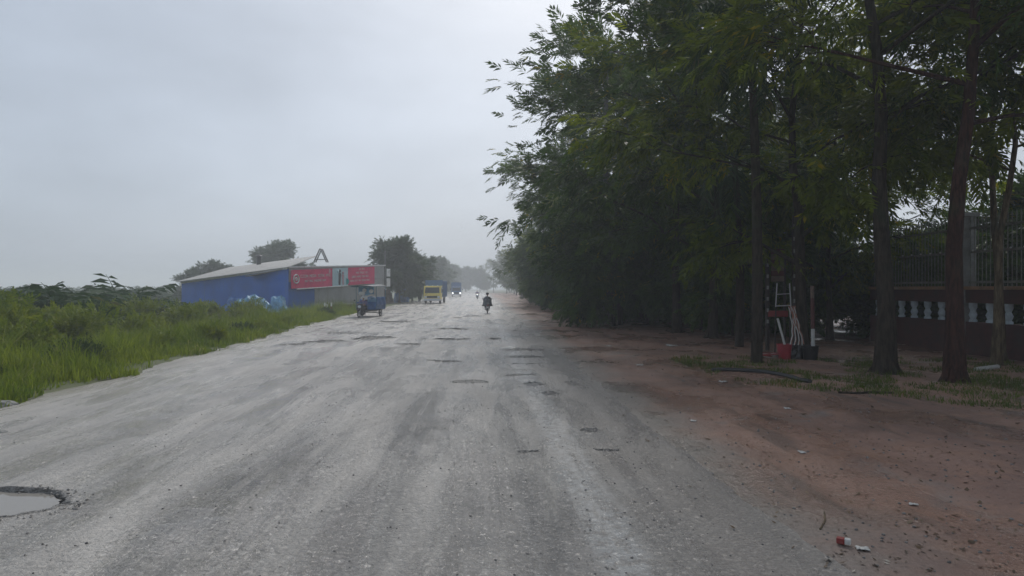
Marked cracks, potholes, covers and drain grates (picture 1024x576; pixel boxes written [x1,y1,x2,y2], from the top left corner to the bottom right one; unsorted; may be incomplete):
pothole [0,485,94,521]
